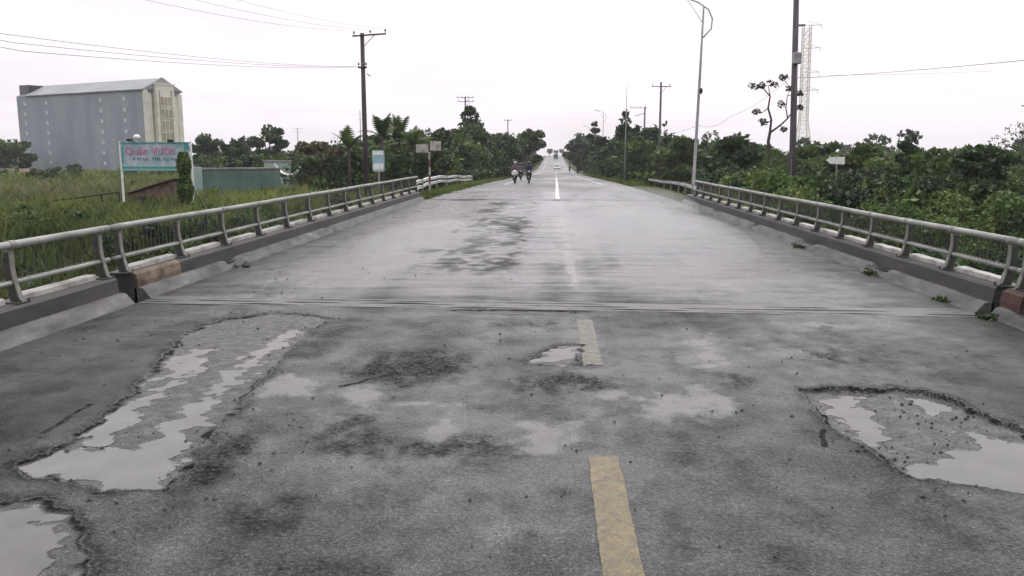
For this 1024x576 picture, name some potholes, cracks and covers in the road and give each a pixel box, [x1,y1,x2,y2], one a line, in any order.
pothole [794,385,1024,494]
pothole [523,344,585,368]
crack [39,404,93,435]
pothole [0,496,96,576]
crack [818,429,829,448]
pothole [13,313,336,492]
crack [339,371,399,387]
